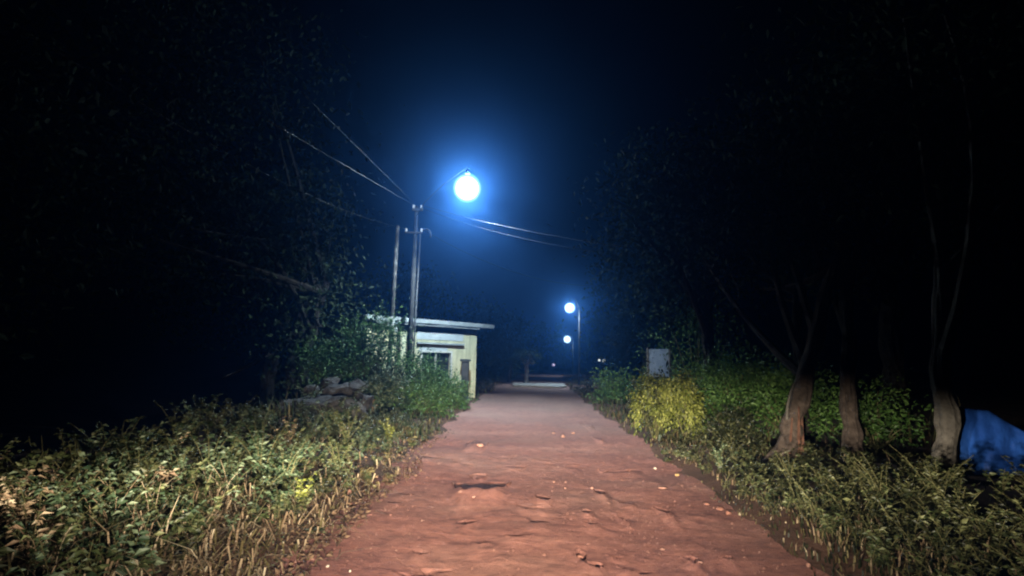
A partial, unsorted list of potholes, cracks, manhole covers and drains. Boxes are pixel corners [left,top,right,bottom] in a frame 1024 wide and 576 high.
pothole [452,481,511,490]
